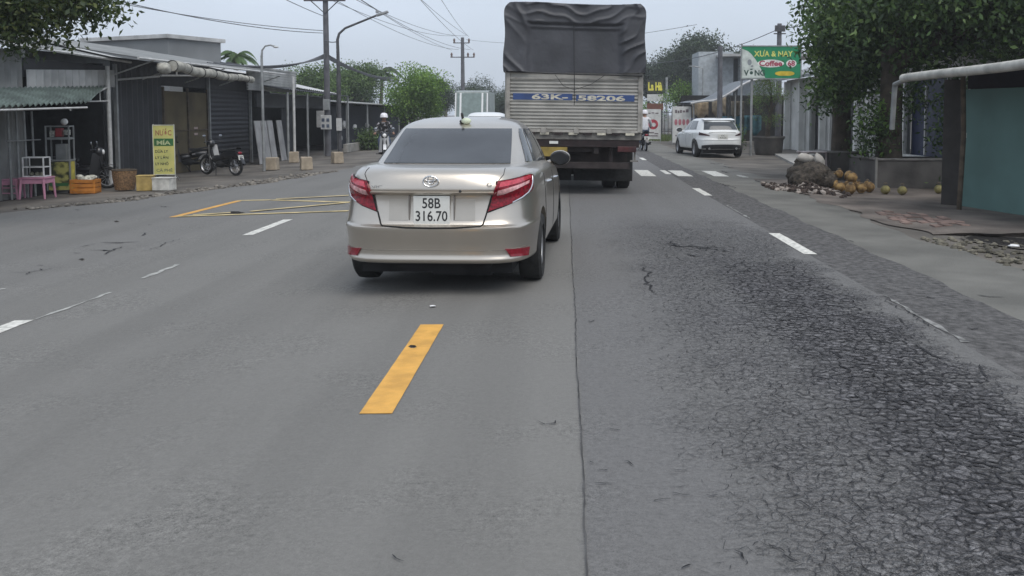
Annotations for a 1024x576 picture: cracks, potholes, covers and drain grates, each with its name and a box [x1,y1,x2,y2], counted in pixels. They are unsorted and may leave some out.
crack [603,217,1024,576]
